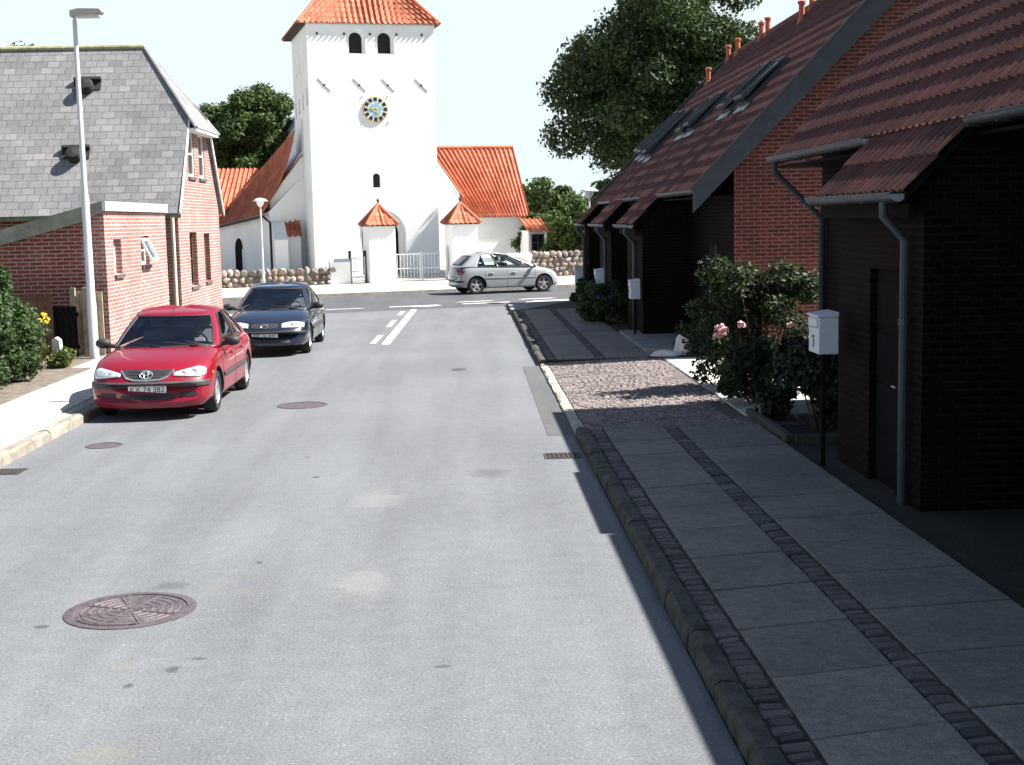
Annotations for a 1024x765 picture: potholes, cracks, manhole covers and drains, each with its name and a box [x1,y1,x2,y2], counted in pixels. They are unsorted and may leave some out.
manhole cover [63,592,197,630]
manhole cover [277,401,328,409]
